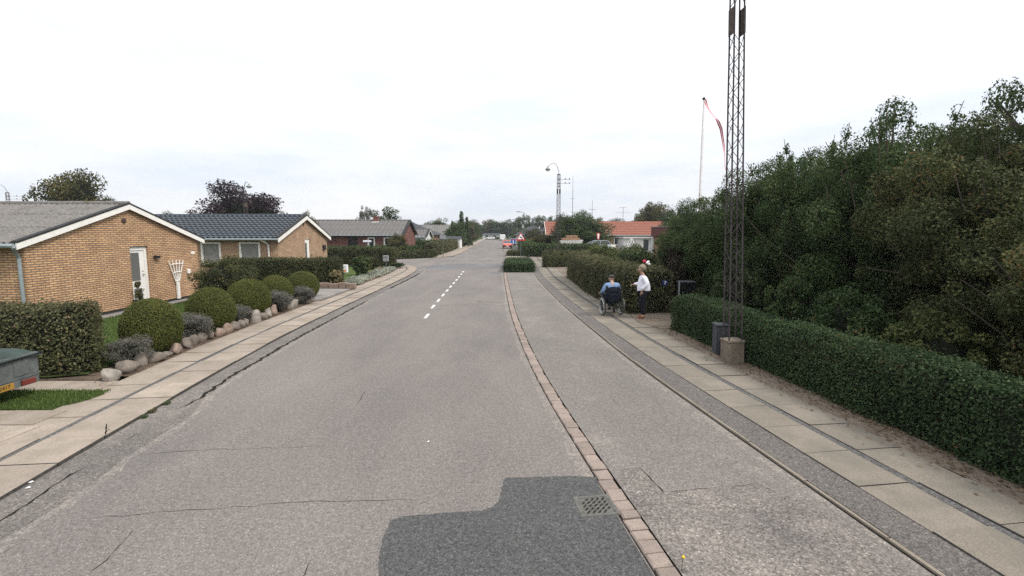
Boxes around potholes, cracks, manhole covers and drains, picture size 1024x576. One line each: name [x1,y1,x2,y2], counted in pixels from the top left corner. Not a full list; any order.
crack [0,466,86,521]
drain grate [573,494,621,519]
crack [92,500,385,571]
